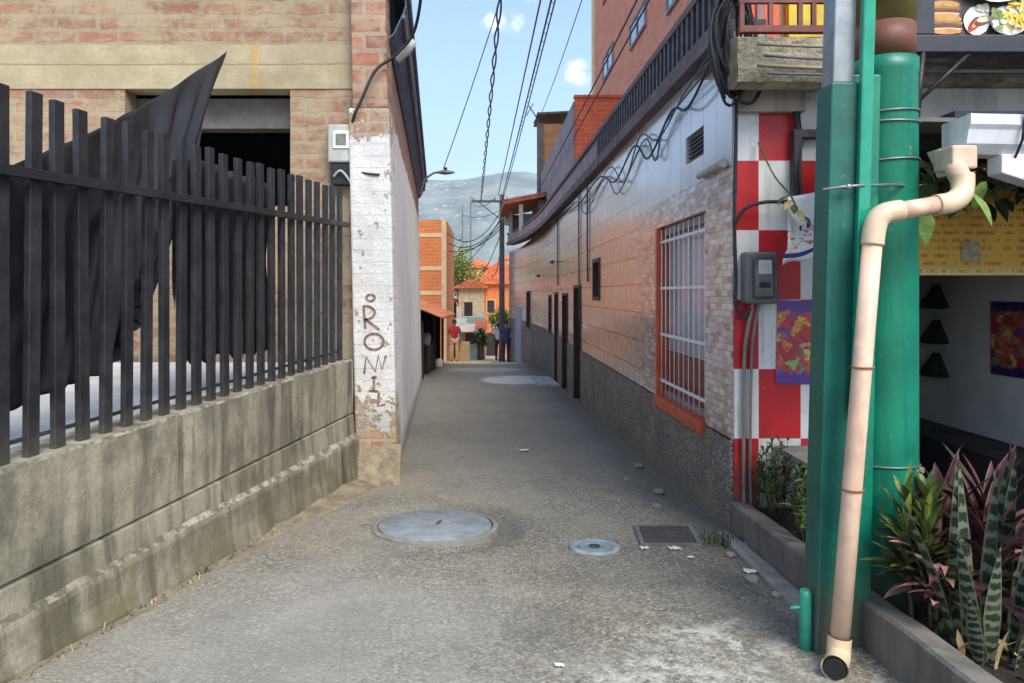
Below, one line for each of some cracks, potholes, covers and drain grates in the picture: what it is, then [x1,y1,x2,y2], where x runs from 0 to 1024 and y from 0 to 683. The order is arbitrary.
manhole cover [569,539,620,555]
manhole cover [372,509,498,548]
